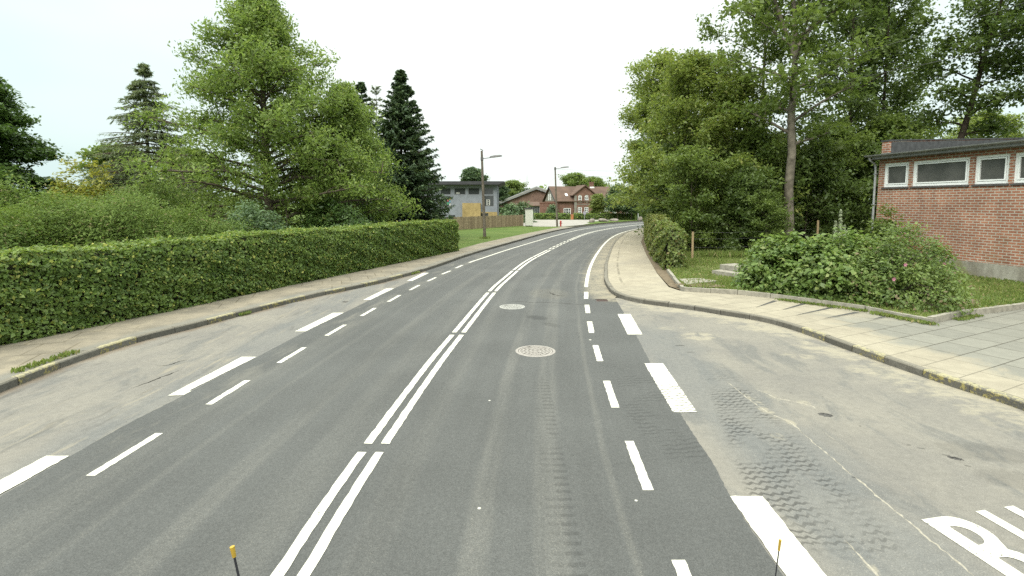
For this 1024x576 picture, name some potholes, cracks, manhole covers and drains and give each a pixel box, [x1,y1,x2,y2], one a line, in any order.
manhole cover [516,345,555,357]
